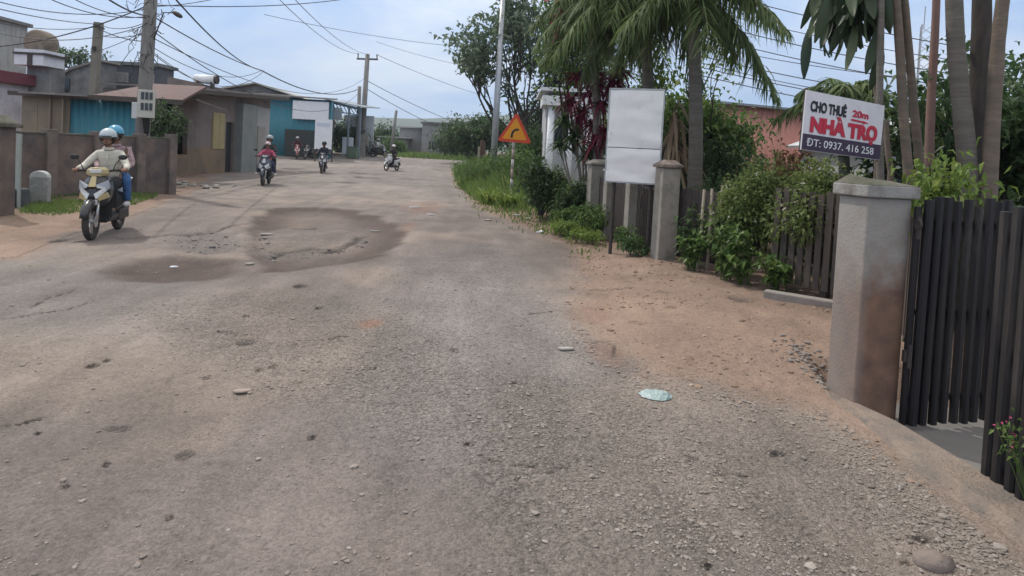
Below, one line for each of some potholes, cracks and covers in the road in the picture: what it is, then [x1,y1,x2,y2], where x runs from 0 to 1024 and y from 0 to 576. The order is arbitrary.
pothole [174,449,195,461]
pothole [233,339,257,347]
pothole [249,207,408,273]
crack [19,292,85,318]
pothole [102,424,133,433]
pothole [102,256,247,283]
